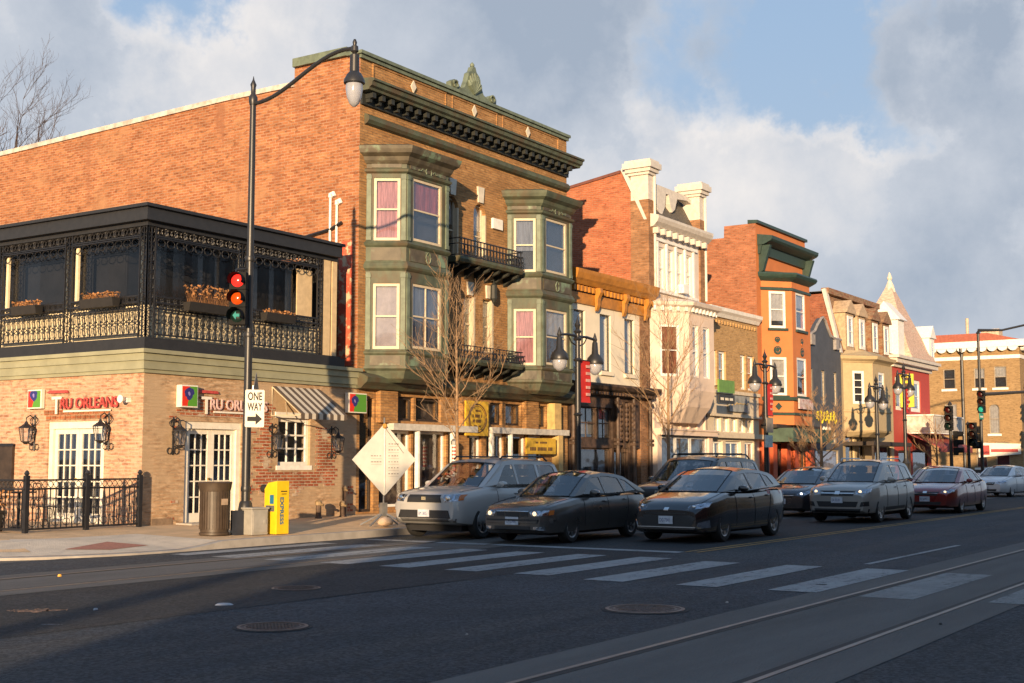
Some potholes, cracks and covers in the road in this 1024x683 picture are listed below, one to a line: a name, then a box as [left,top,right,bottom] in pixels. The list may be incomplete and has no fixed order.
manhole cover [600,604,690,614]
manhole cover [232,622,313,632]
